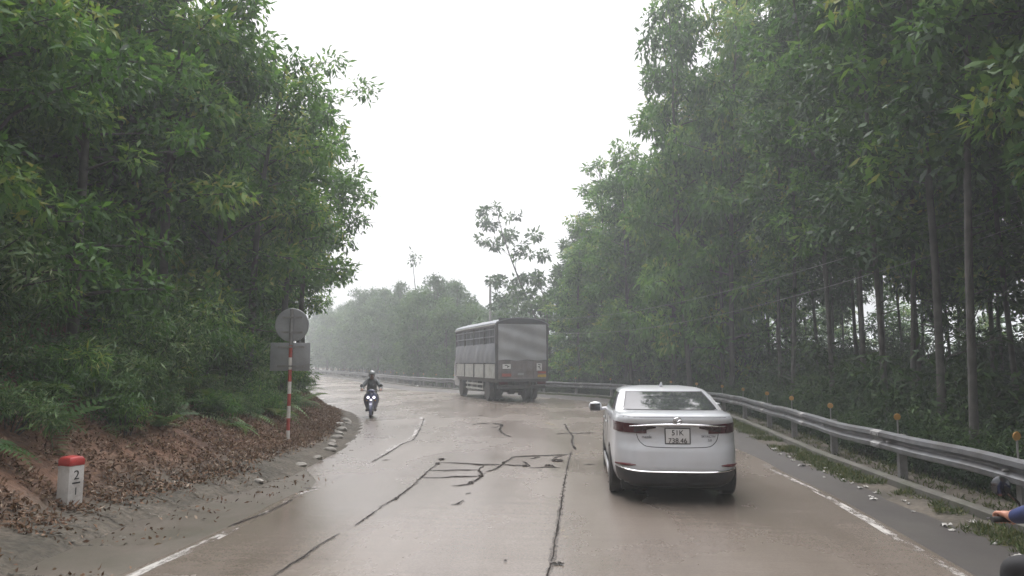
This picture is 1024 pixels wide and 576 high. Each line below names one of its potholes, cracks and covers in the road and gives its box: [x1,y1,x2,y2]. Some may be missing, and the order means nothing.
crack [427,424,594,505]
crack [372,419,424,462]
